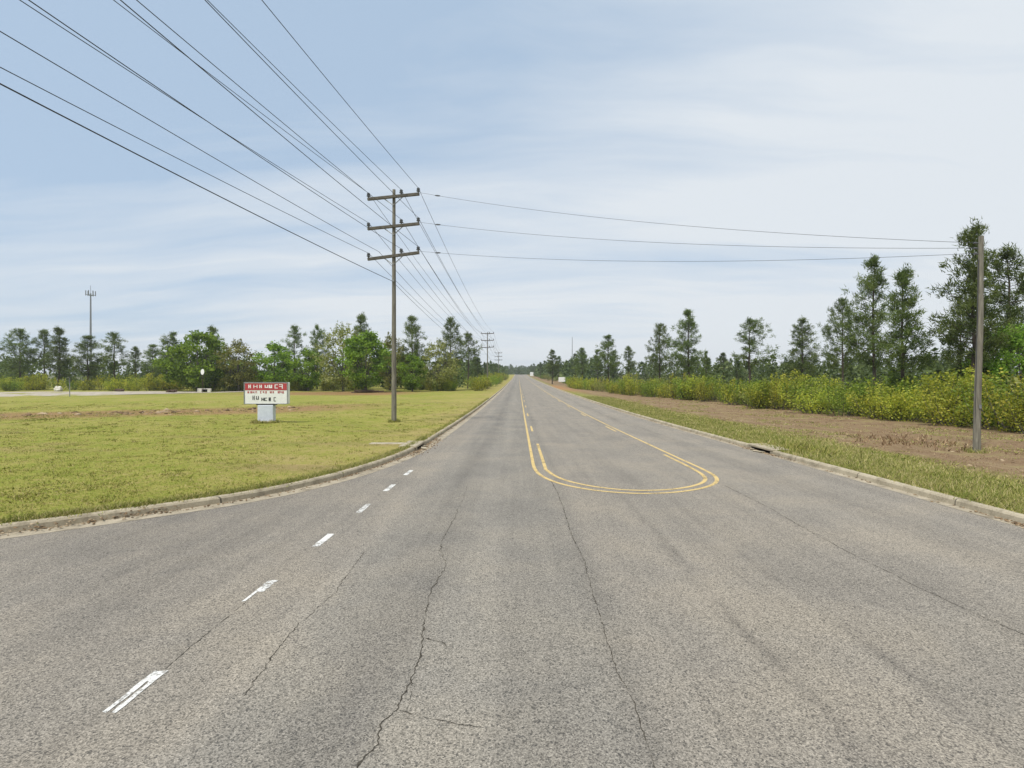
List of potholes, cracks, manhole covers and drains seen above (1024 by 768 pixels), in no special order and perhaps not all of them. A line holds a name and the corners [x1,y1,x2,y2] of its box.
drain grate [749,443,790,454]
crack [357,489,479,768]
crack [245,550,368,695]
